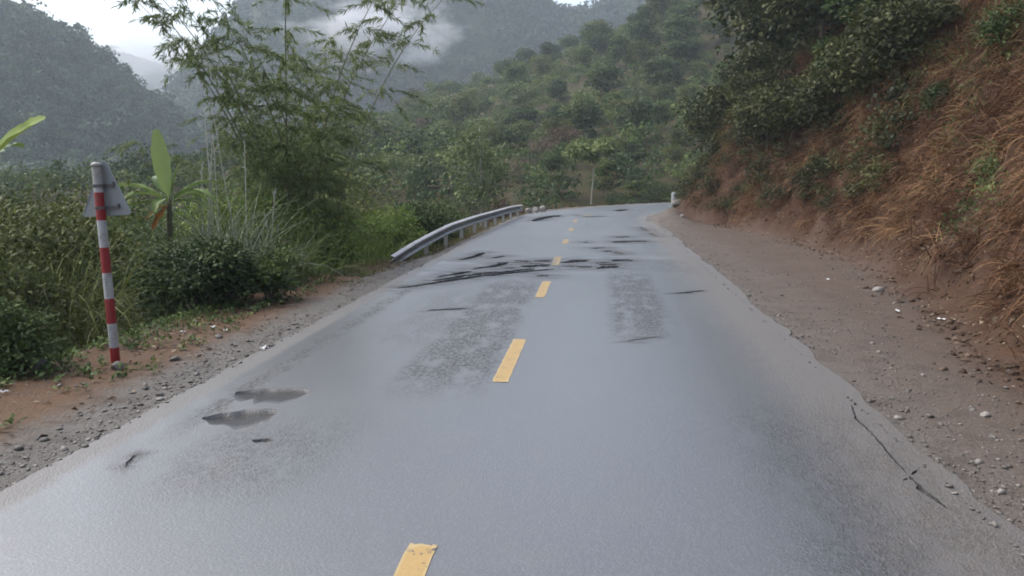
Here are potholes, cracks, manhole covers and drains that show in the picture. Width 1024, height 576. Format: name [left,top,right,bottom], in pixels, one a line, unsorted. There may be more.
pothole [234,387,311,404]
pothole [202,408,278,430]
crack [851,405,948,509]
